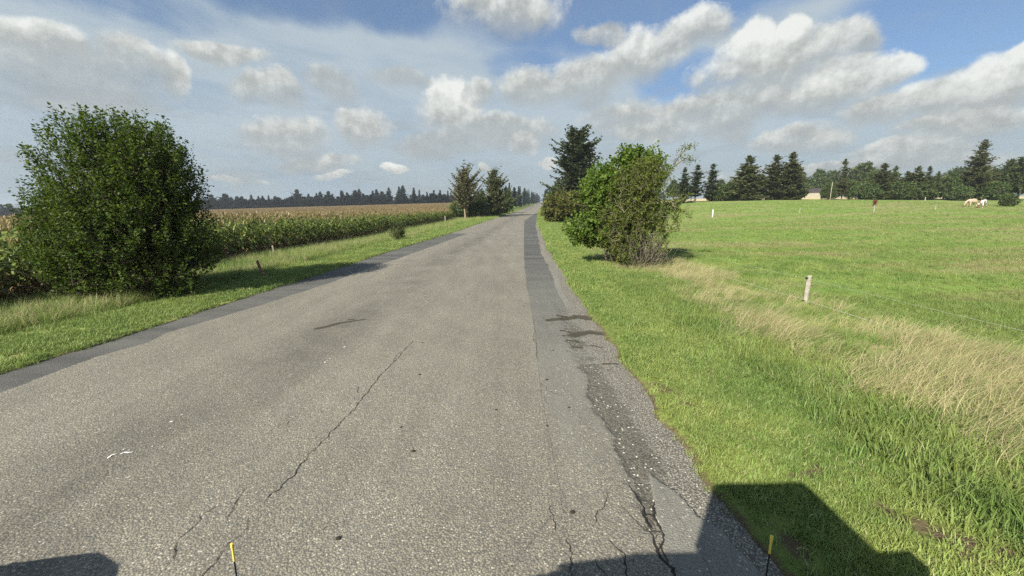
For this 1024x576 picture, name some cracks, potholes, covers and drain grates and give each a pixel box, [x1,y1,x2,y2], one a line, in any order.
crack [173,486,248,576]
crack [595,484,676,576]
crack [263,346,408,503]
